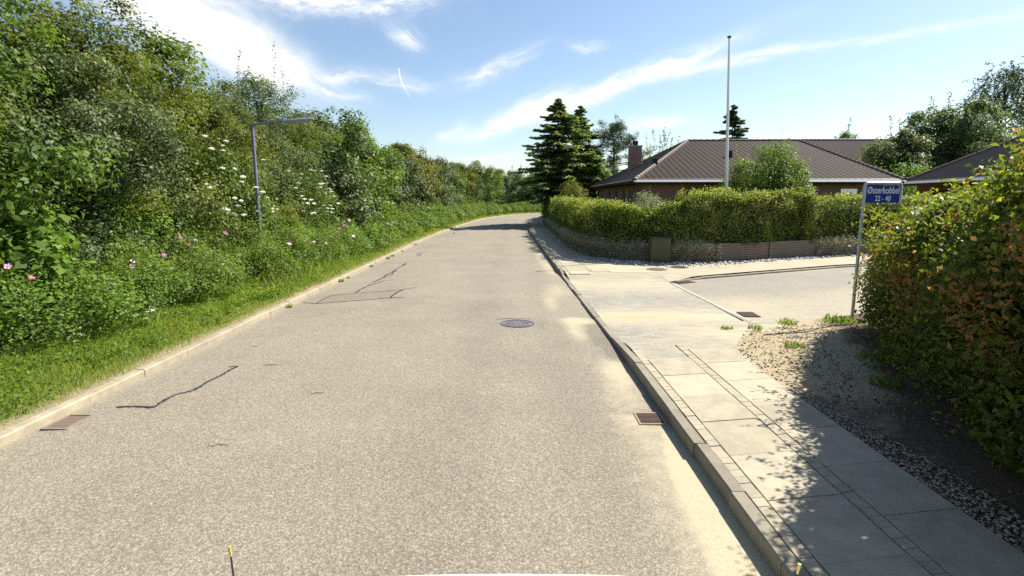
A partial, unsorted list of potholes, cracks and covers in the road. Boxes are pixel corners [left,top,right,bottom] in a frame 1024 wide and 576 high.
drain grate [633,412,667,426]
drain grate [40,414,94,431]
manhole cover [500,319,534,328]
